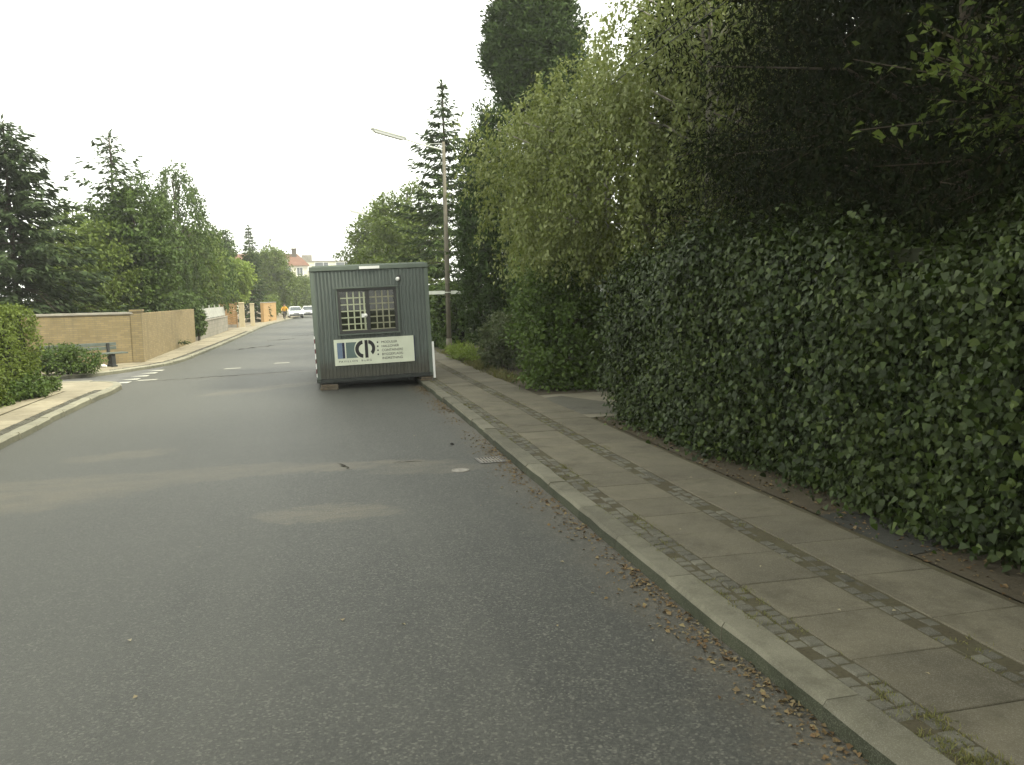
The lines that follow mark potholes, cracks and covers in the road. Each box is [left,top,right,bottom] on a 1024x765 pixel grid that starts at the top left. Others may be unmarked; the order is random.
drain grate [474,456,506,464]
